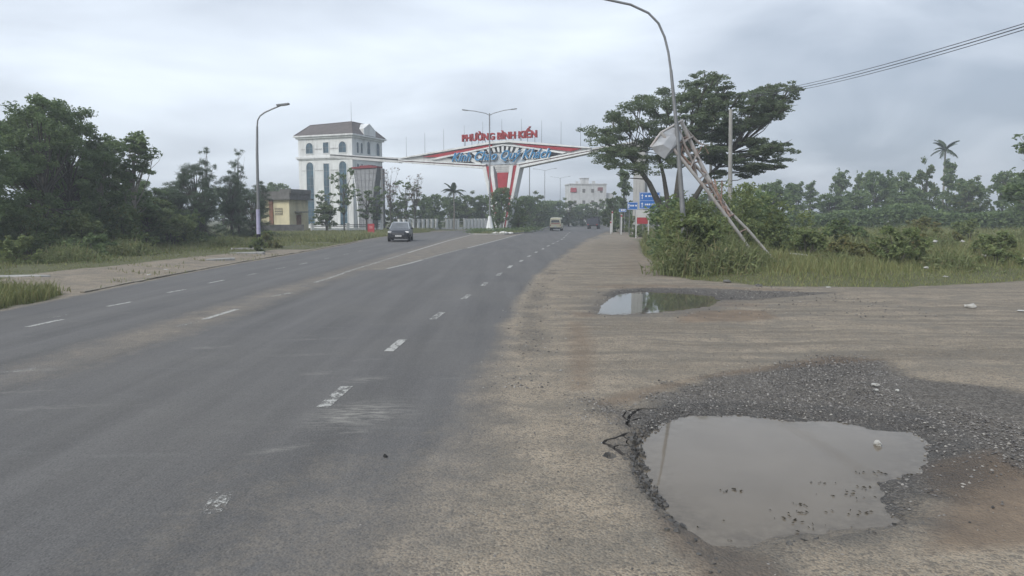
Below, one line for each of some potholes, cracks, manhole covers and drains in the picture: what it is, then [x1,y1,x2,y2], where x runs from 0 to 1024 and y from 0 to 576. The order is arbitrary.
pothole [623,402,969,576]
crack [602,408,657,456]
pothole [588,288,740,317]
